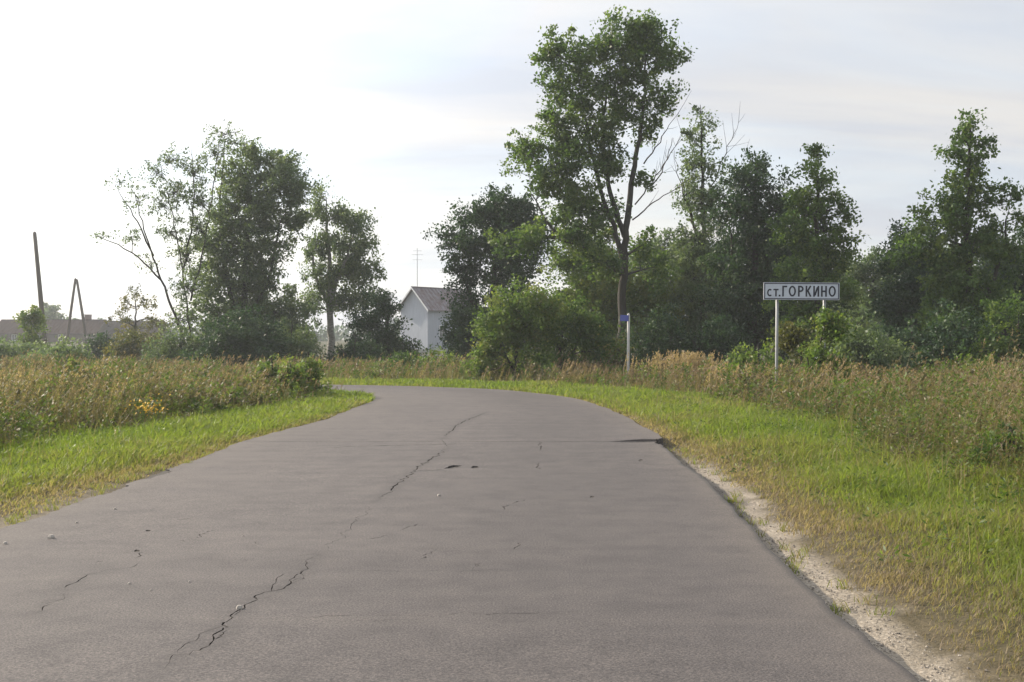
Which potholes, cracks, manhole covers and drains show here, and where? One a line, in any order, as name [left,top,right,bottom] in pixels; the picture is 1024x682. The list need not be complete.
crack [166,507,370,666]
crack [334,412,486,497]
